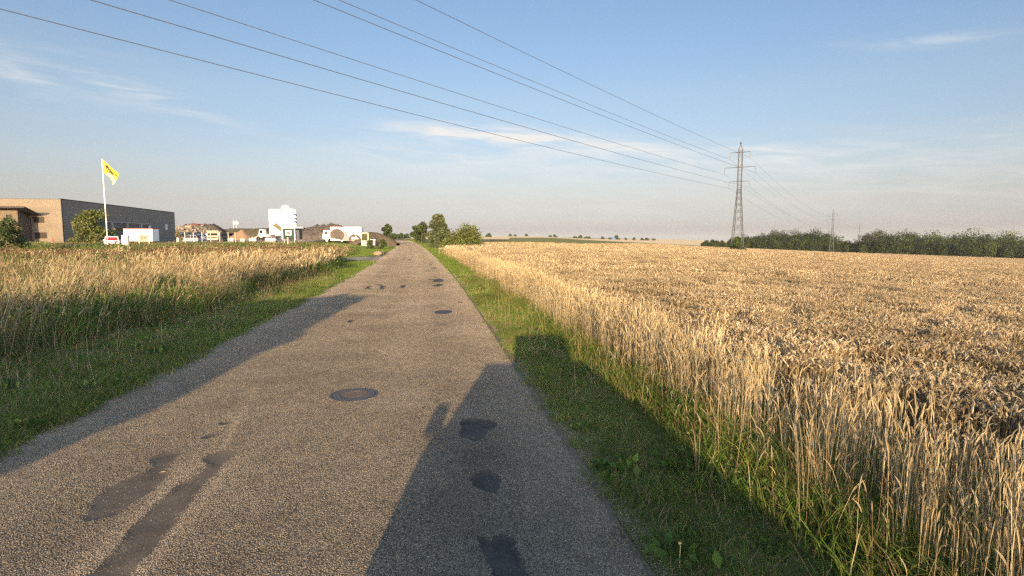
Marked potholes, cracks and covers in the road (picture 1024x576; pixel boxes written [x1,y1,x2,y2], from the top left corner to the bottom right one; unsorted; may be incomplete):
manhole cover [330,388,378,401]
